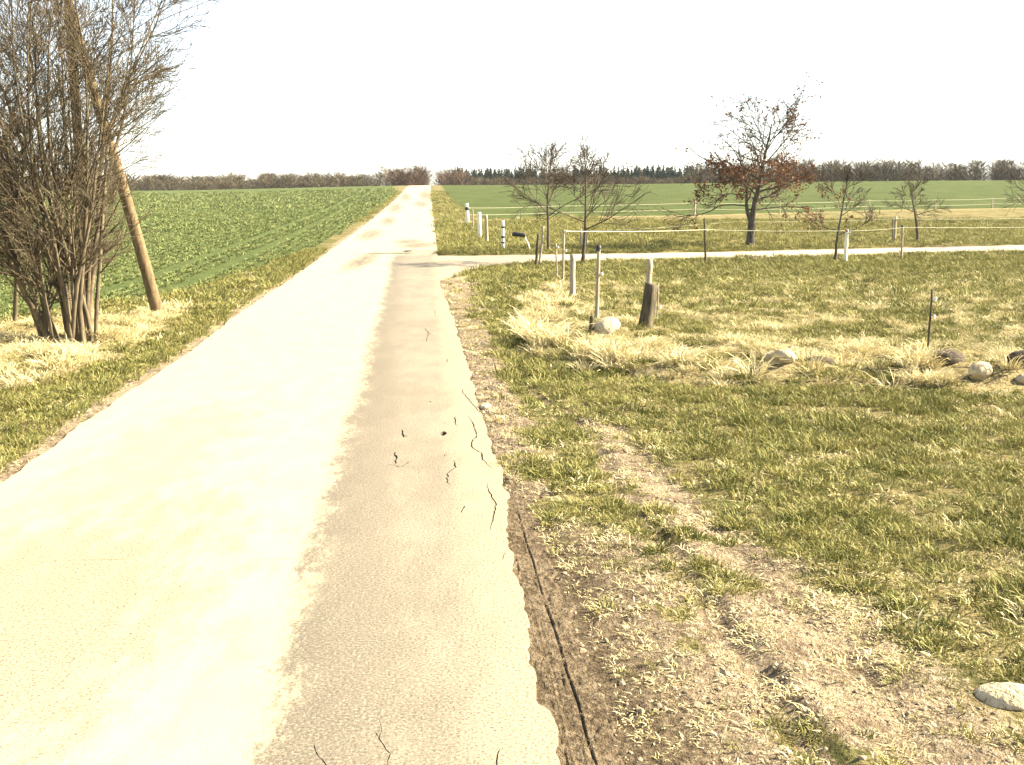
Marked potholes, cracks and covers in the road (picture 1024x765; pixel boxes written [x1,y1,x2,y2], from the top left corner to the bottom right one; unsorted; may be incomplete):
crack [375,720,391,765]
crack [443,389,491,484]
crack [487,486,497,529]
